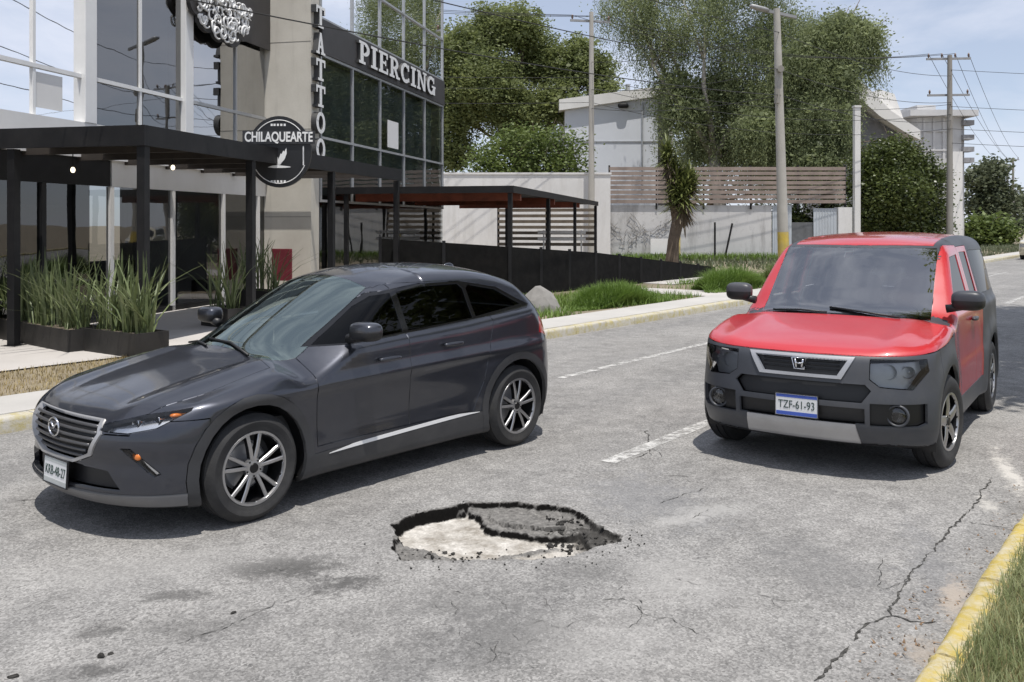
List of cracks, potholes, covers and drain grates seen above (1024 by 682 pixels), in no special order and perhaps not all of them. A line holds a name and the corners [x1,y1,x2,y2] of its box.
pothole [364,501,645,570]
crack [145,596,308,658]
crack [605,572,699,634]
crack [814,478,1002,681]
